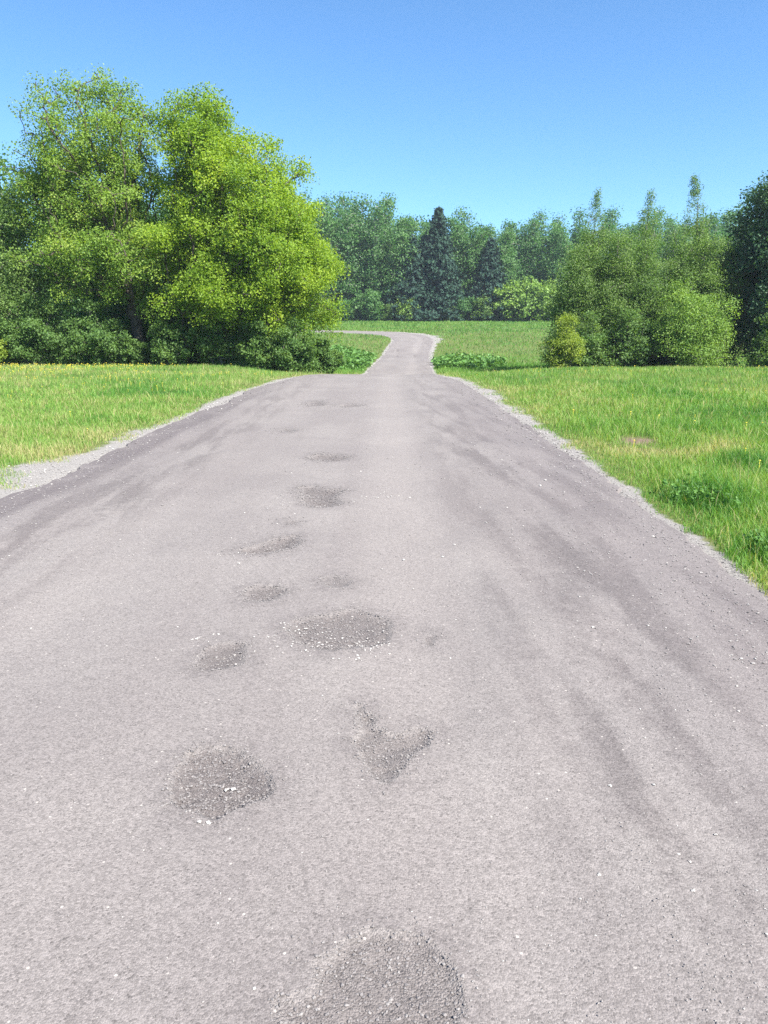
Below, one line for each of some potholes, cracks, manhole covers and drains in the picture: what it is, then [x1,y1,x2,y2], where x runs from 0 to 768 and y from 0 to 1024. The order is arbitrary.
pothole [171,633,261,678]
pothole [236,581,301,606]
pothole [269,606,407,656]
pothole [129,737,295,834]
pothole [311,571,367,592]
pothole [337,696,446,795]
pothole [305,451,356,463]
pothole [221,532,312,558]
pothole [246,912,498,1024]
pothole [286,483,360,509]
